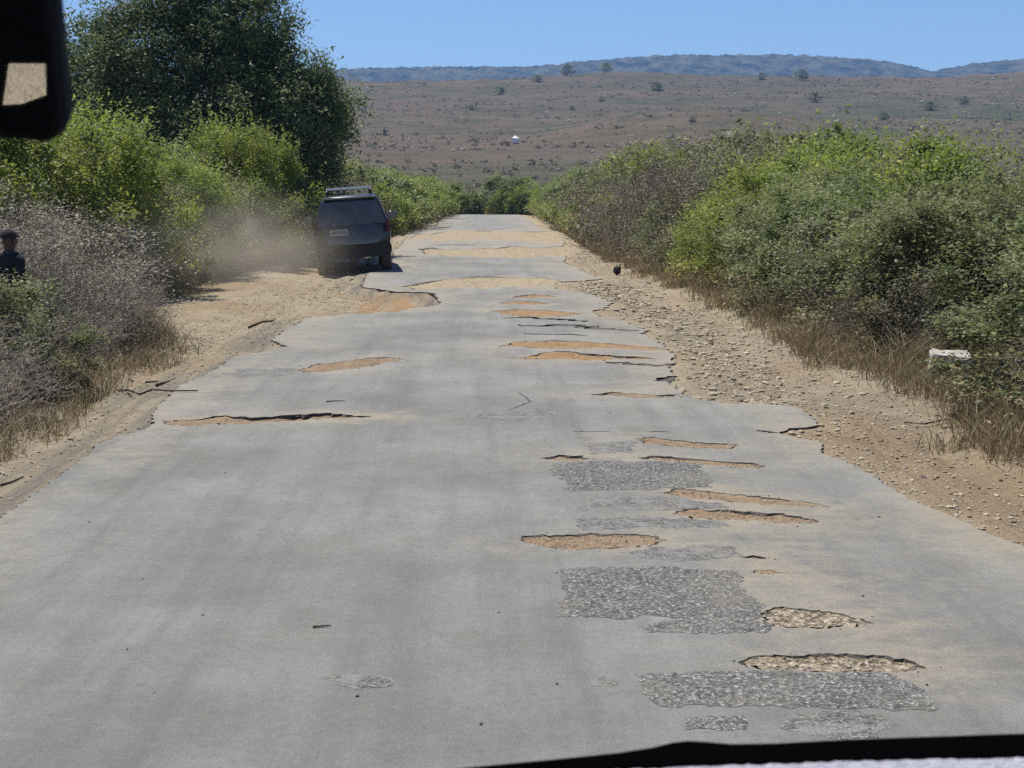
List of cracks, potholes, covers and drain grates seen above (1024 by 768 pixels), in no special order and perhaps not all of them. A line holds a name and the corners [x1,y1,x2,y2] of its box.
pothole [299,356,409,372]
pothole [498,340,668,350]
pothole [402,276,569,290]
pothole [633,456,765,468]
pothole [760,607,873,630]
pothole [341,292,434,314]
pothole [522,351,660,361]
pothole [511,531,666,553]
pothole [674,507,826,527]
pothole [658,487,827,507]
pothole [733,652,942,676]
pothole [636,436,743,449]
